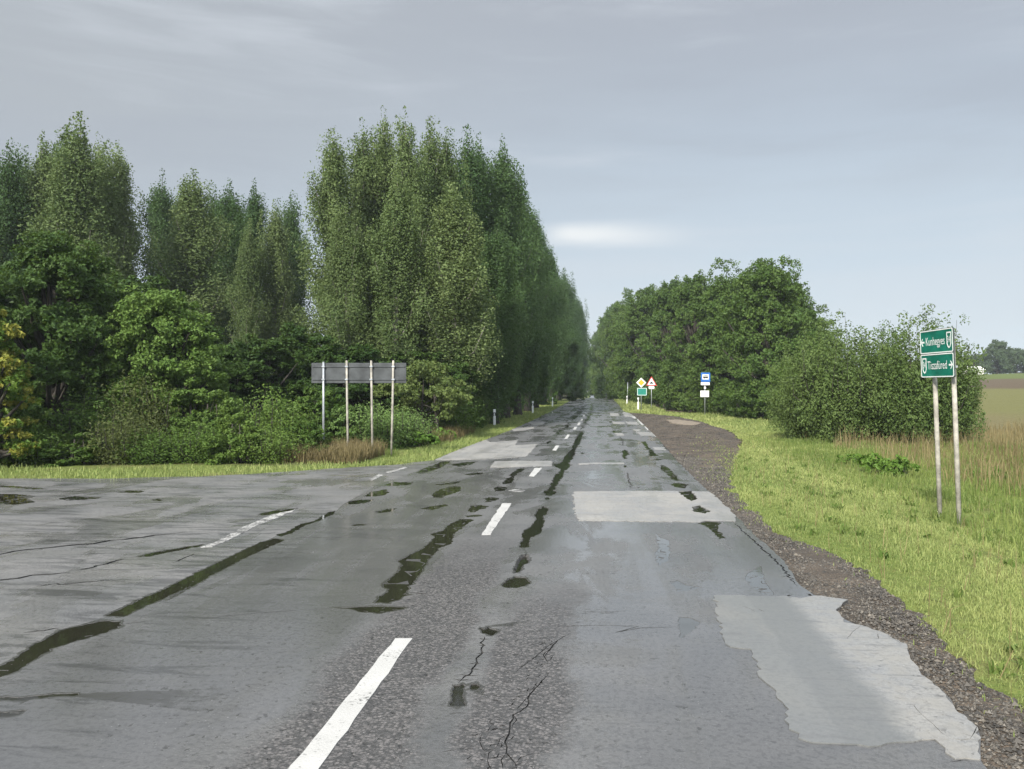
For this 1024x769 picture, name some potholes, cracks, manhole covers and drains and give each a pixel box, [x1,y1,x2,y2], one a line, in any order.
pothole [502,576,531,588]
crack [445,611,678,769]
pothole [449,683,466,706]
crack [0,534,166,586]
